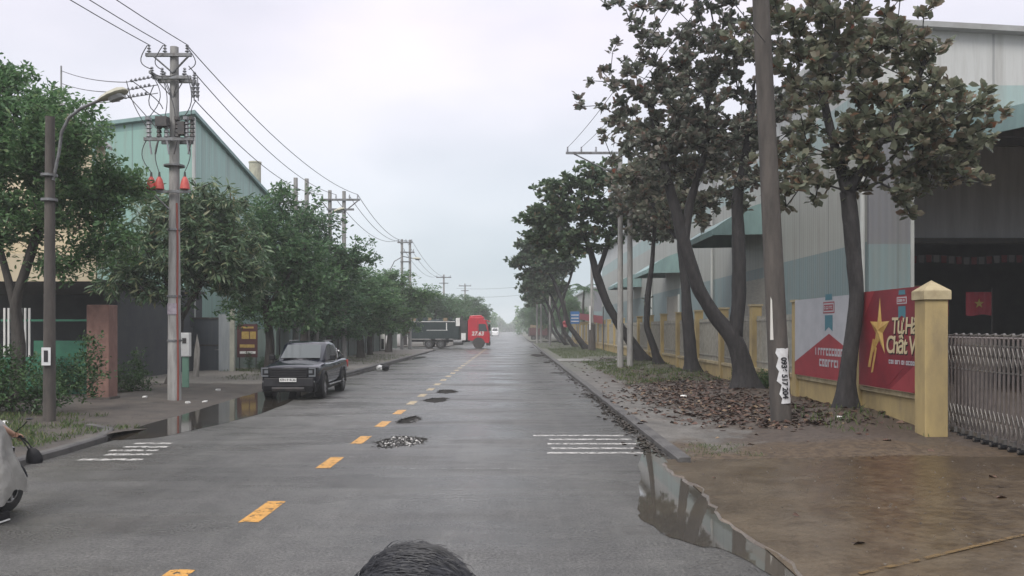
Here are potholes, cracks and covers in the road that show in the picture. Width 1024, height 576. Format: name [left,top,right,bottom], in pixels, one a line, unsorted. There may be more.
pothole [396,416,421,424]
pothole [372,434,432,449]
